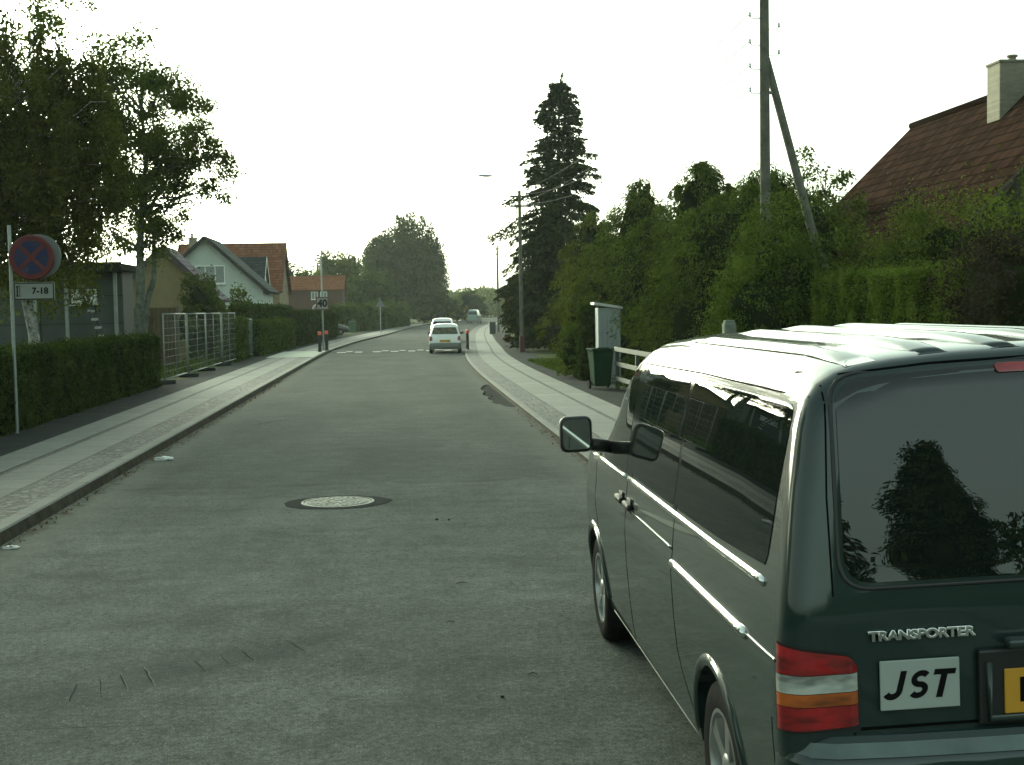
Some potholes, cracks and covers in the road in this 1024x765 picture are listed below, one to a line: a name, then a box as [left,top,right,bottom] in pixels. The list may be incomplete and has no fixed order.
crack [193,647,256,673]
manhole cover [284,495,393,510]
pothole [481,385,516,407]
crack [120,667,157,691]
